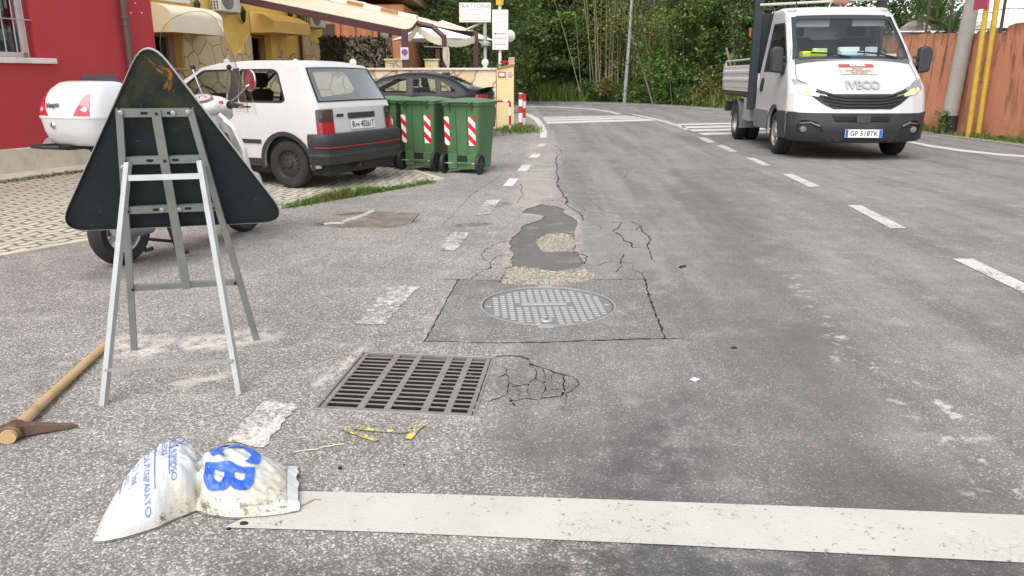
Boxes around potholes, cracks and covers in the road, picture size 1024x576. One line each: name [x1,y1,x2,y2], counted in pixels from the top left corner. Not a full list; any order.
manhole cover [480,285,616,328]
drain grate [314,351,495,417]
crack [424,144,690,409]
